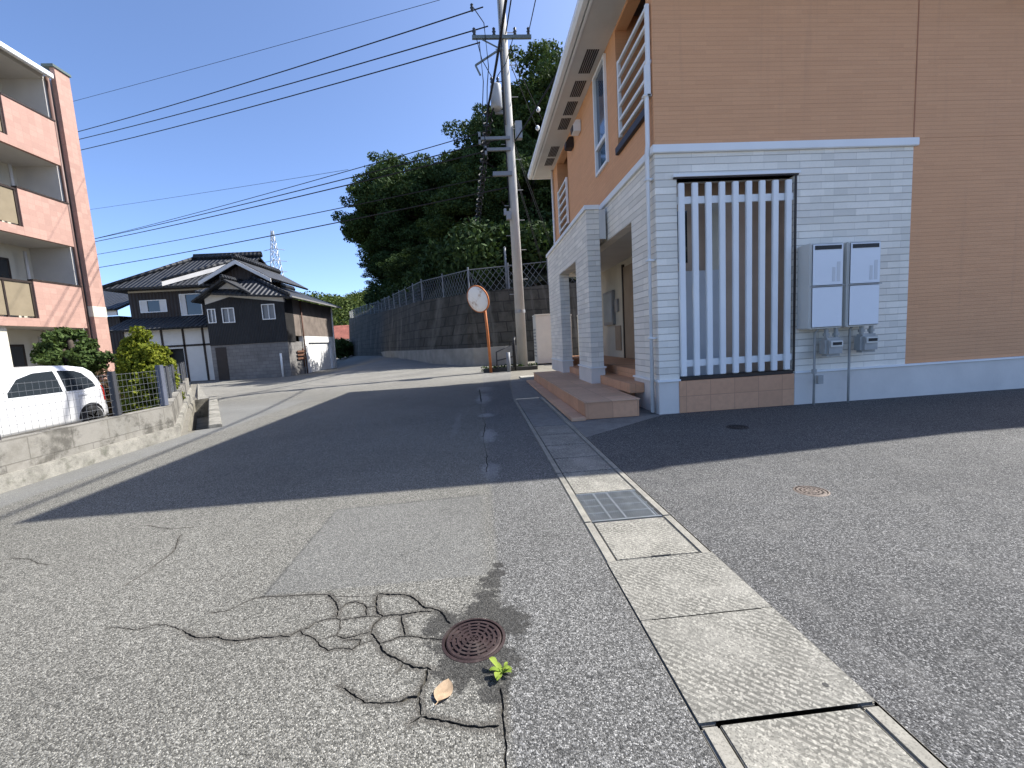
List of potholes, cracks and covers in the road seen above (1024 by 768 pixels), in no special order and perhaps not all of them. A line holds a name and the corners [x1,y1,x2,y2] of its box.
manhole cover [793,486,831,497]
drain grate [576,490,662,524]
manhole cover [442,618,506,663]
crack [113,593,507,768]
